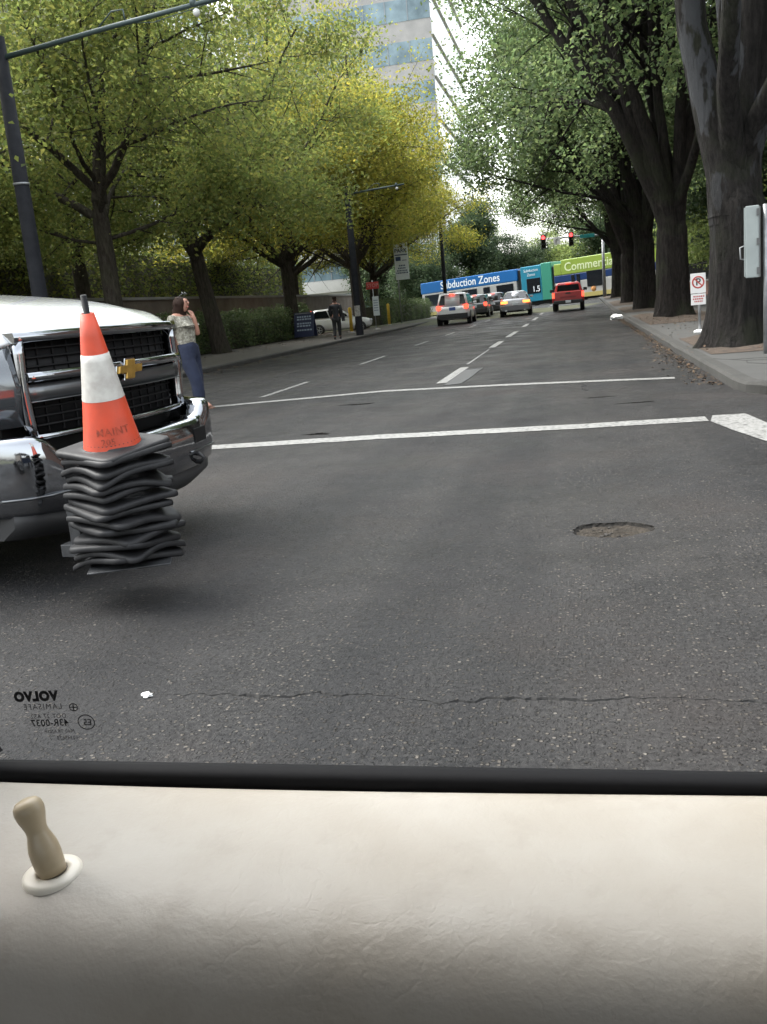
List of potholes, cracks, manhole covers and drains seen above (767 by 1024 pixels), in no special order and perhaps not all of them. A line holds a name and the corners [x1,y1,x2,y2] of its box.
crack [170,691,767,705]
pothole [573,522,655,538]
